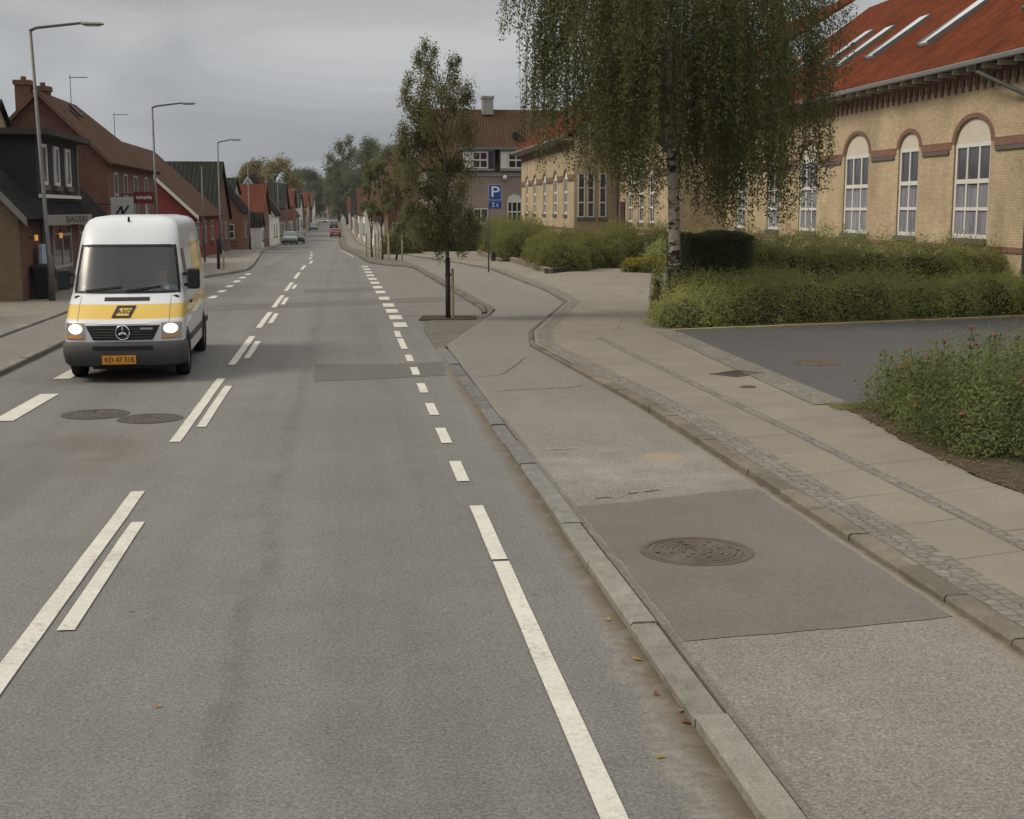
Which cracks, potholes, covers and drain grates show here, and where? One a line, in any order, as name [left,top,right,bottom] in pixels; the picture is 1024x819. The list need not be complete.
manhole cover [117,413,183,424]
manhole cover [61,409,130,420]
manhole cover [640,537,754,566]
